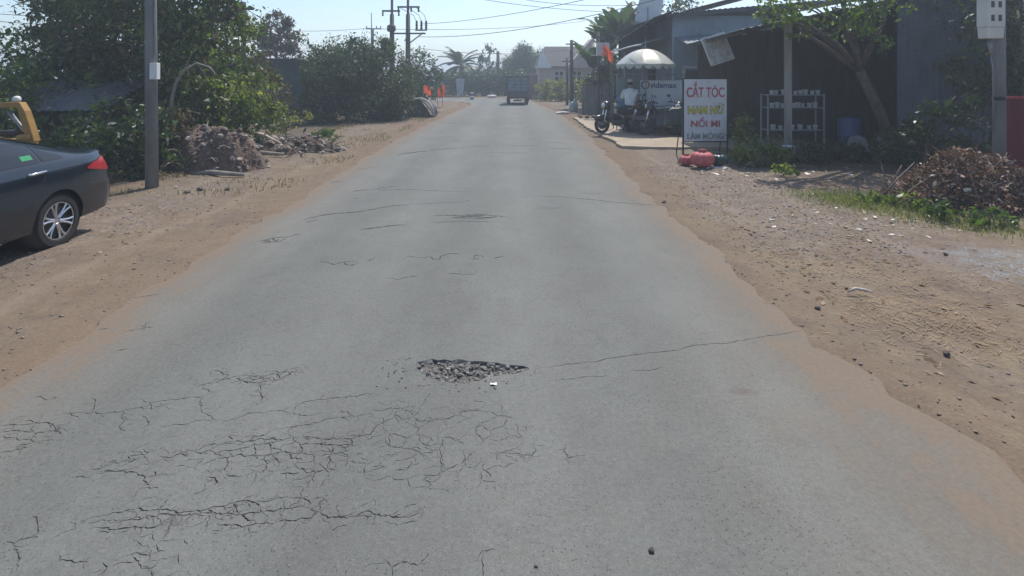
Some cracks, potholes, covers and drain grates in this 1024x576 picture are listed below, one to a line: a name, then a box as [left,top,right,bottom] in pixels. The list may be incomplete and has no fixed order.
crack [323,253,502,275]
crack [261,200,505,243]
crack [357,393,543,492]
pothole [376,357,530,392]
crack [537,331,795,380]
crack [0,364,425,576]
